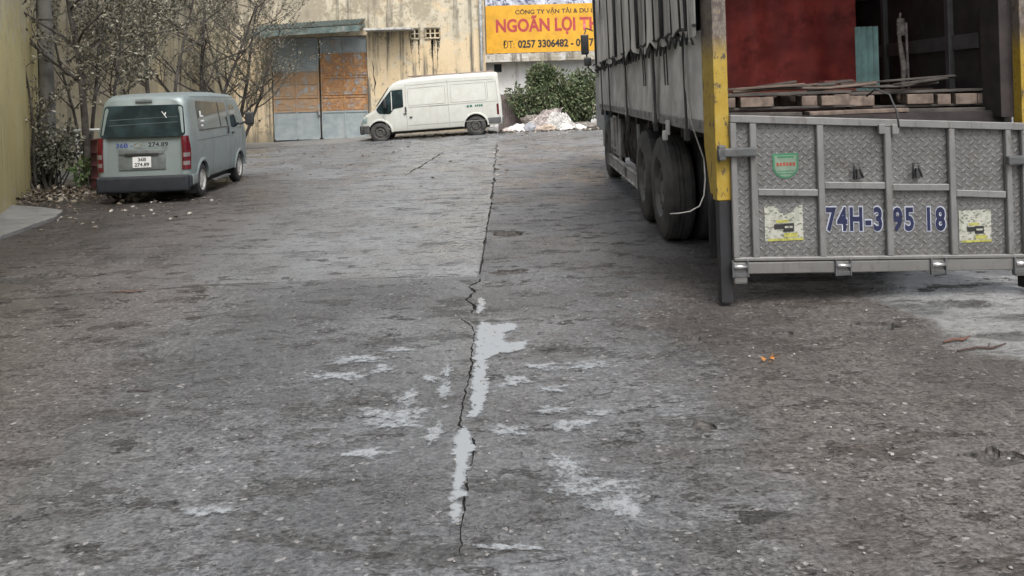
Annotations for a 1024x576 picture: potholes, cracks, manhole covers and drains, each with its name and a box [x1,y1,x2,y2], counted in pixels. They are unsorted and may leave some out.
crack [7,145,543,554]
pothole [963,446,1024,467]
